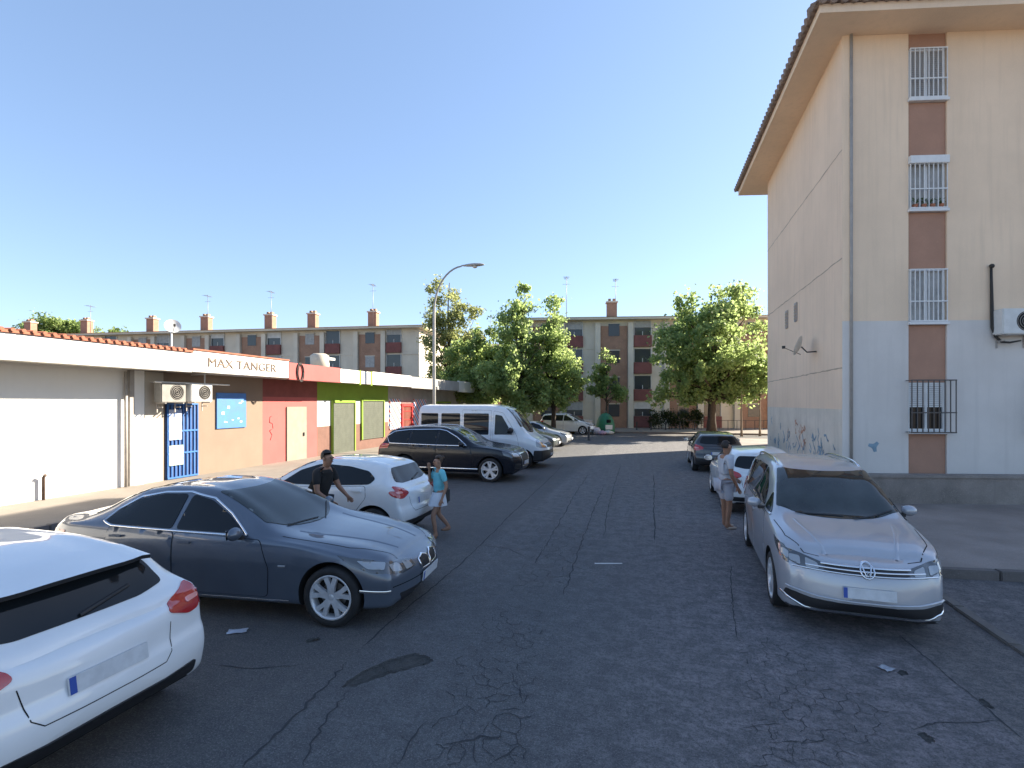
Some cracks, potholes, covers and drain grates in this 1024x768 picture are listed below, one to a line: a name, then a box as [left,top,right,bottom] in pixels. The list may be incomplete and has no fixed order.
crack [512,468,620,594]
crack [399,605,542,765]
crack [740,637,889,767]
